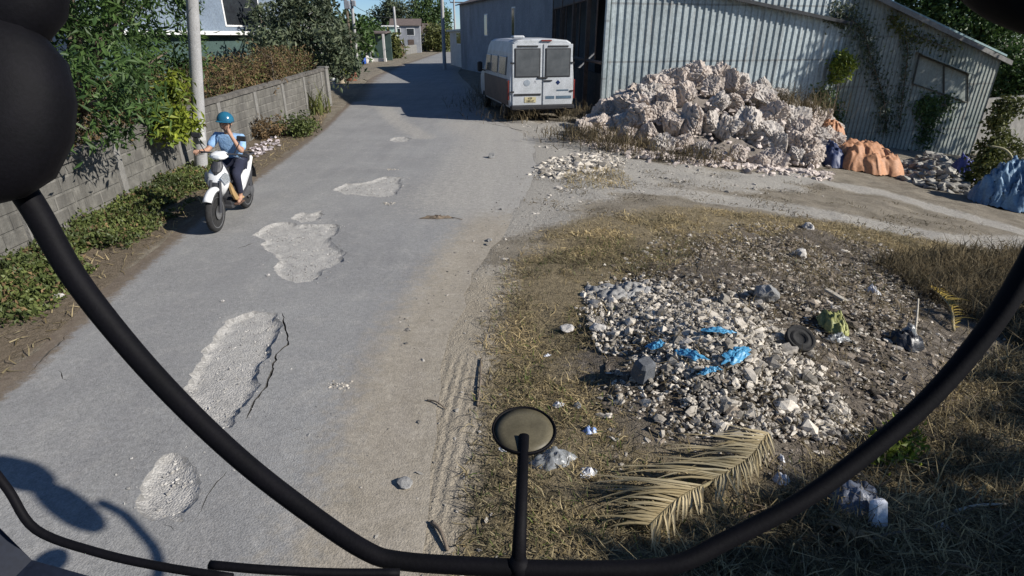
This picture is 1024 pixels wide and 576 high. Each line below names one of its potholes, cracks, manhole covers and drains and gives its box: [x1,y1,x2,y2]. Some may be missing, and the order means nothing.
pothole [183,304,292,428]
crack [246,313,298,430]
pothole [114,446,235,522]
pothole [333,176,410,197]
pothole [238,220,348,283]
pothole [291,206,329,223]
